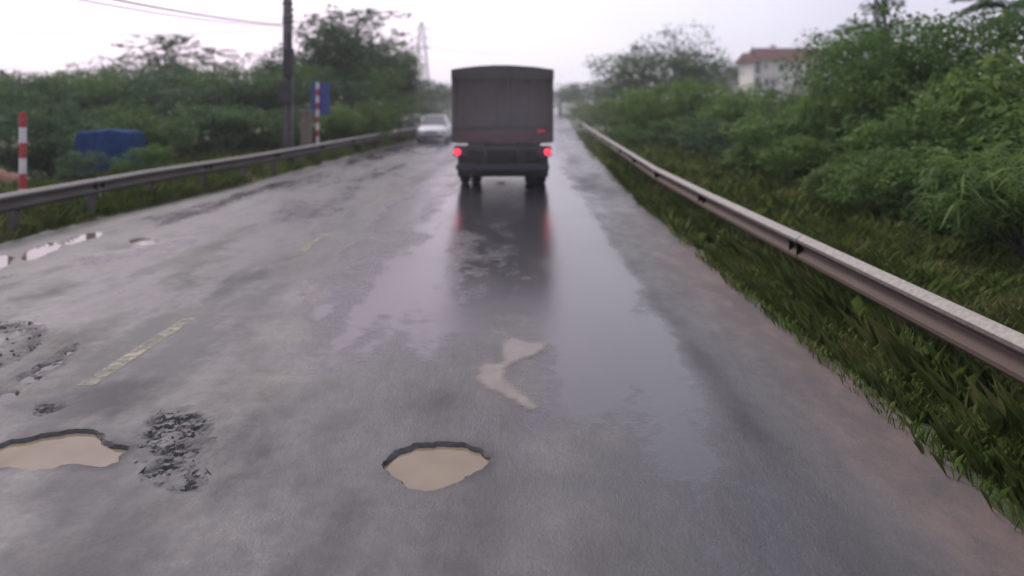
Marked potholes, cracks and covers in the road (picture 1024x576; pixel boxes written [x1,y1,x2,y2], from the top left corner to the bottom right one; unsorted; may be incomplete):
pothole [27,398,69,418]
pothole [21,242,62,260]
pothole [0,255,15,269]
pothole [381,441,492,491]
pothole [0,321,49,368]
pothole [0,428,132,471]
pothole [64,232,103,245]
pothole [0,342,85,406]
pothole [132,404,219,494]
